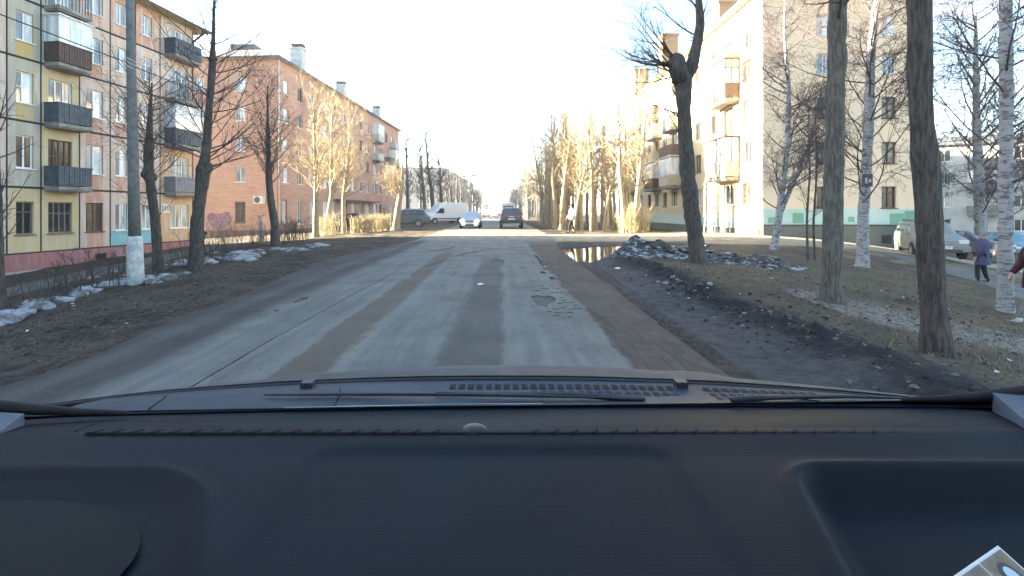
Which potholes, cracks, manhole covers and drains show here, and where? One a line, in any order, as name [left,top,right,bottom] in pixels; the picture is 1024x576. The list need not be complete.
pothole [531,295,556,307]
